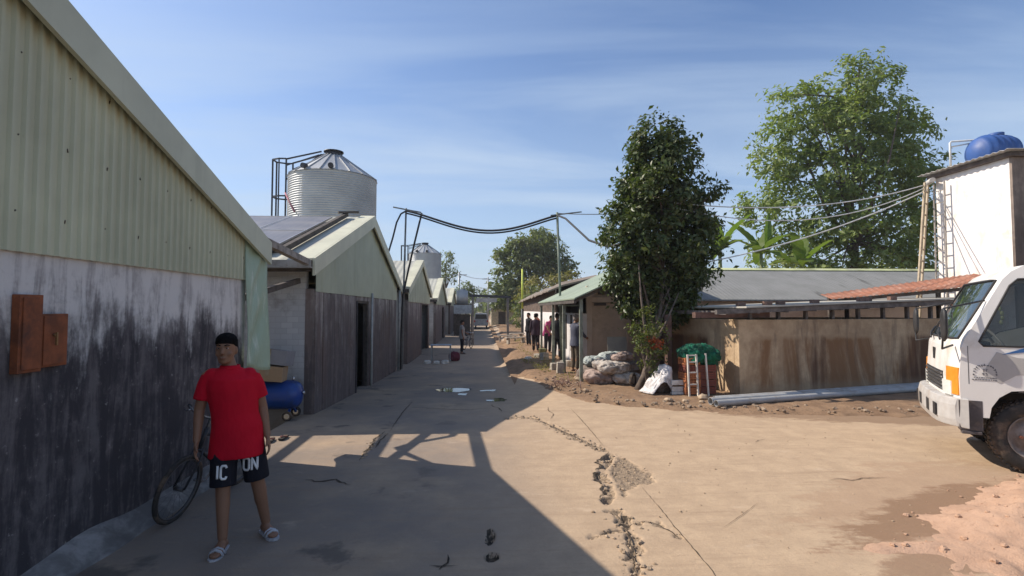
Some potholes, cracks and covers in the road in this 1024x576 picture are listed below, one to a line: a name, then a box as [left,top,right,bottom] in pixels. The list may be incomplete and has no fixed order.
pothole [593,453,654,505]
crack [358,404,605,460]
crack [590,492,716,576]
